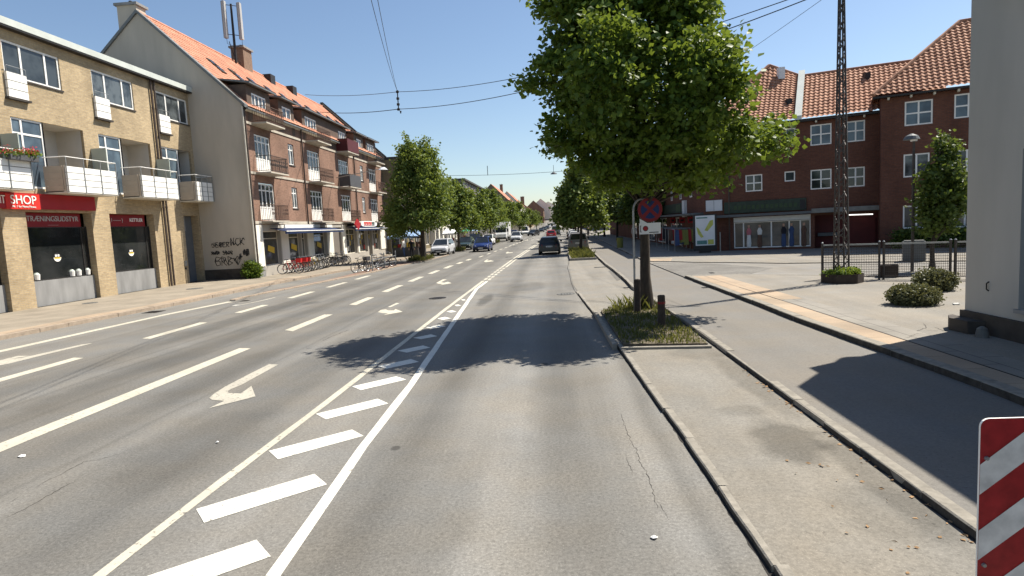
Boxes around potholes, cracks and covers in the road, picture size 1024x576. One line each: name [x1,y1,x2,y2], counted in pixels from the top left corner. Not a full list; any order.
crack [621,415,666,513]
